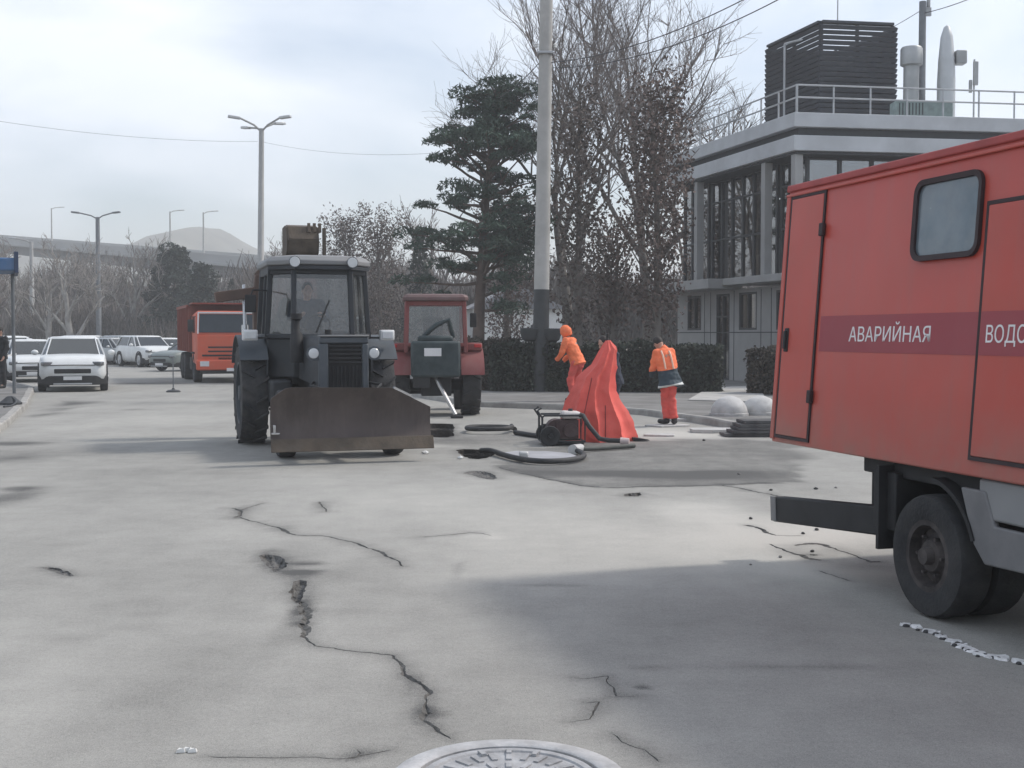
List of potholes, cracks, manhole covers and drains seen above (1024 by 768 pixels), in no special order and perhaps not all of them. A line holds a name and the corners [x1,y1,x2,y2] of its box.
crack [573,676,658,761]
pothole [288,580,307,603]
crack [745,525,881,581]
crack [208,601,451,759]
crack [232,503,403,566]
pothole [464,471,496,480]
pothole [259,554,288,572]
manhole cover [397,739,621,768]
